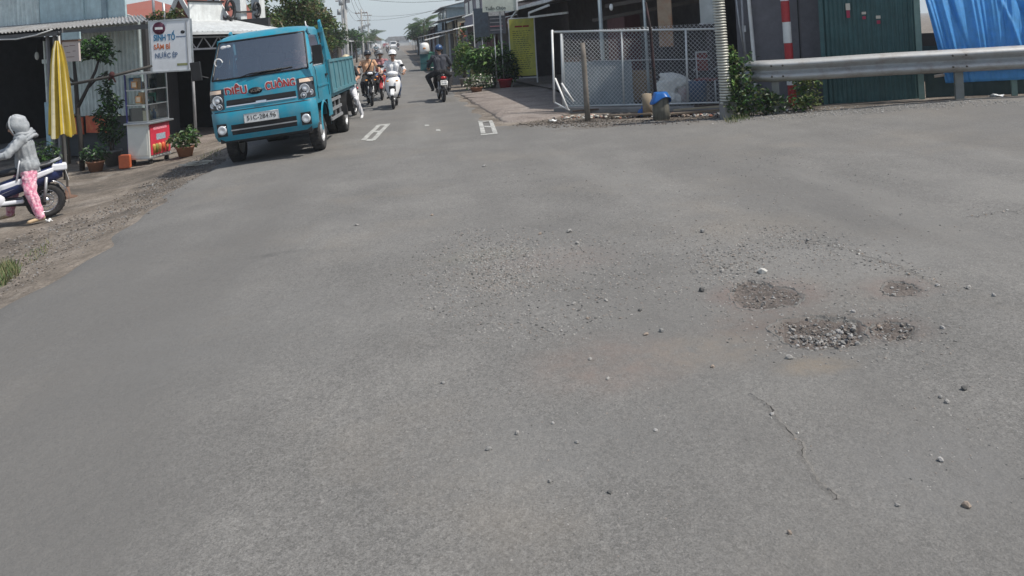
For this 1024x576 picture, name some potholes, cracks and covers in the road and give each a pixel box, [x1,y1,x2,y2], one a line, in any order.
pothole [879,280,922,297]
pothole [765,314,872,351]
pothole [727,279,806,311]
crack [747,393,841,500]
pothole [868,320,916,342]
